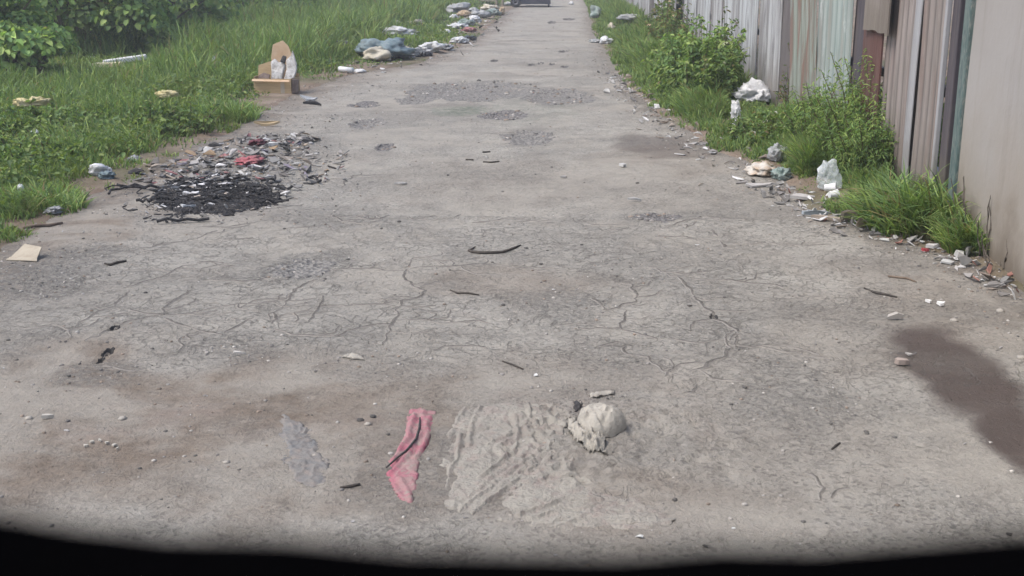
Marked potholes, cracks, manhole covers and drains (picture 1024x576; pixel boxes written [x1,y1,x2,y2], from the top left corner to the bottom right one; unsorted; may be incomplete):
pothole [500,130,555,146]
pothole [374,143,396,152]
pothole [518,87,595,105]
crack [806,472,851,500]
pothole [267,258,337,279]
pothole [403,79,540,102]
pothole [347,118,387,130]
crack [19,204,568,352]
pothole [477,110,528,121]
crack [558,217,831,394]
pothole [628,212,683,223]
